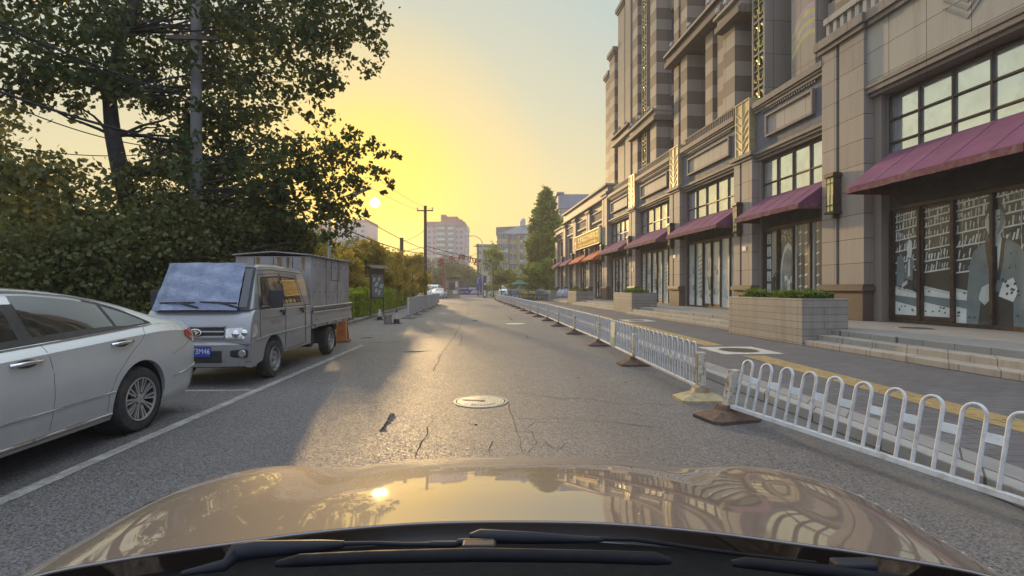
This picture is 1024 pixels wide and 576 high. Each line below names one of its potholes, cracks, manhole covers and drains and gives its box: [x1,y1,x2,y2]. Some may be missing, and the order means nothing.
crack [508,396,662,456]
manhole cover [453,395,508,408]
pothole [379,413,397,432]
crack [372,301,527,372]
